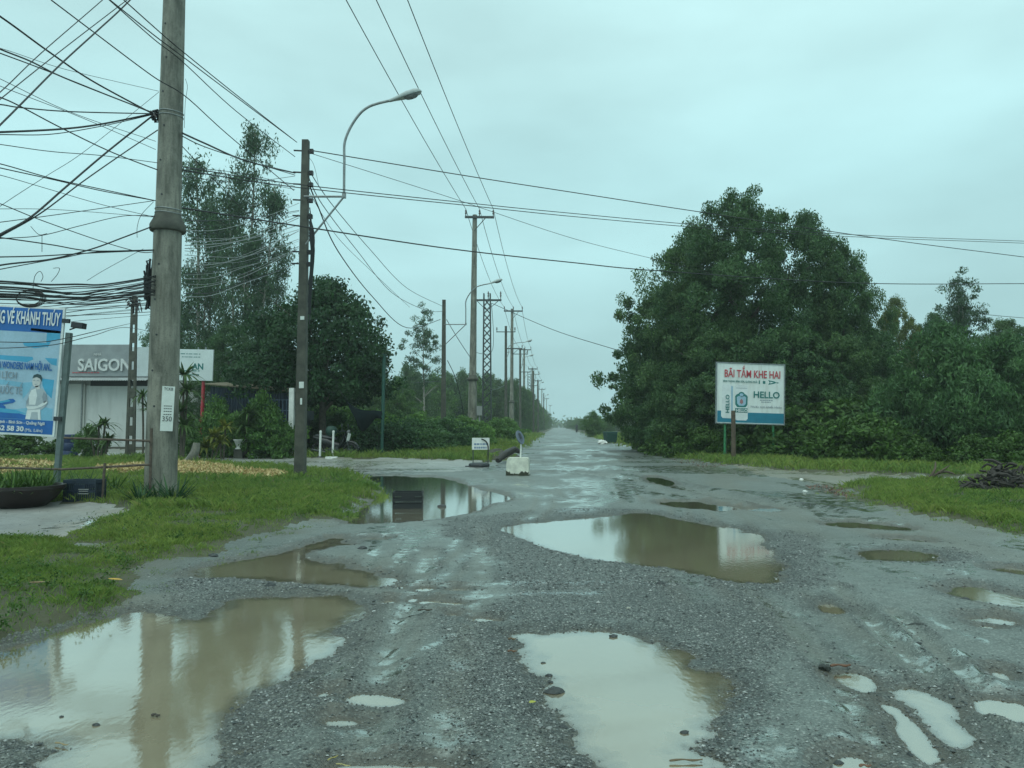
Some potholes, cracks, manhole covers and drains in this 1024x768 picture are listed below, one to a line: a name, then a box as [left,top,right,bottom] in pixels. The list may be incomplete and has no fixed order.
pothole [169,533,405,589]
pothole [952,683,1024,726]
pothole [931,579,1024,608]
pothole [642,475,683,488]
pothole [332,474,517,525]
pothole [843,544,955,563]
pothole [814,518,925,531]
pothole [0,587,381,768]
pothole [801,594,862,617]
pothole [496,621,758,768]
pothole [811,662,895,696]
pothole [490,509,797,585]
